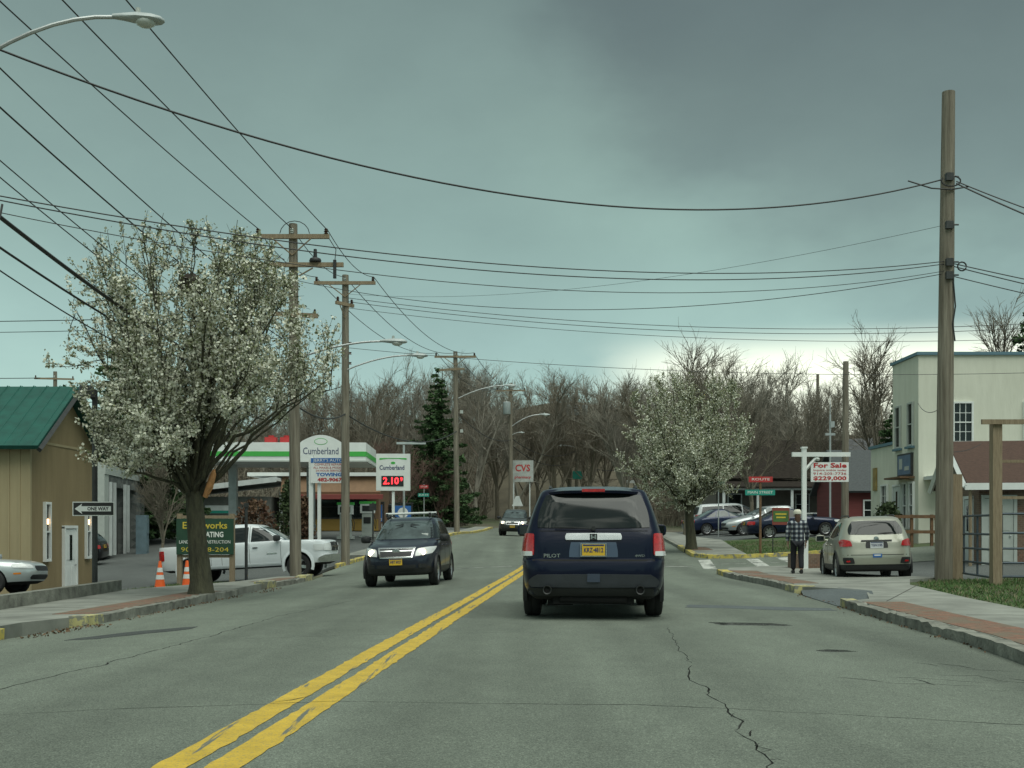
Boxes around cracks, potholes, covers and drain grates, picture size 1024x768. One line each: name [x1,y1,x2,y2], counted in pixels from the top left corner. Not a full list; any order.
crack [7,629,1021,768]
